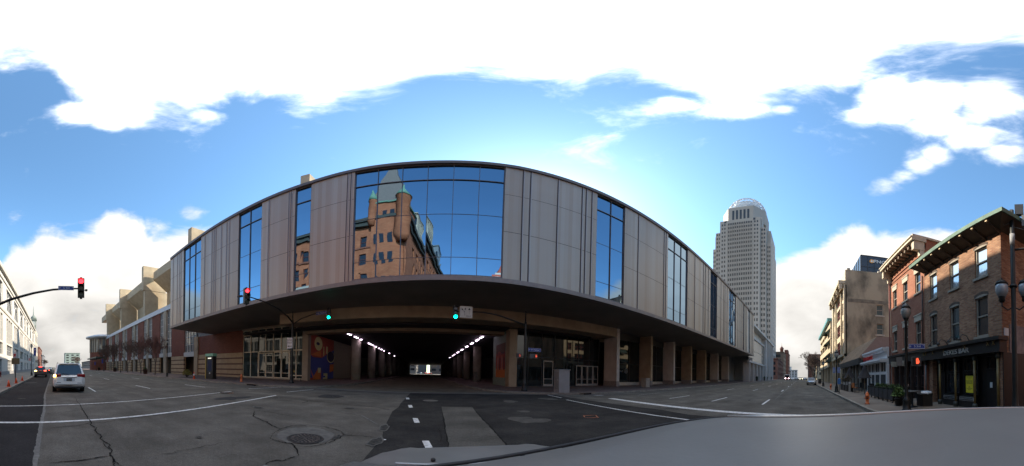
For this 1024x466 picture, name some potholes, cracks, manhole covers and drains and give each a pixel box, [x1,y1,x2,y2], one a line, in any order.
crack [252,409,370,465]
crack [53,399,174,466]
manhole cover [287,433,324,444]
